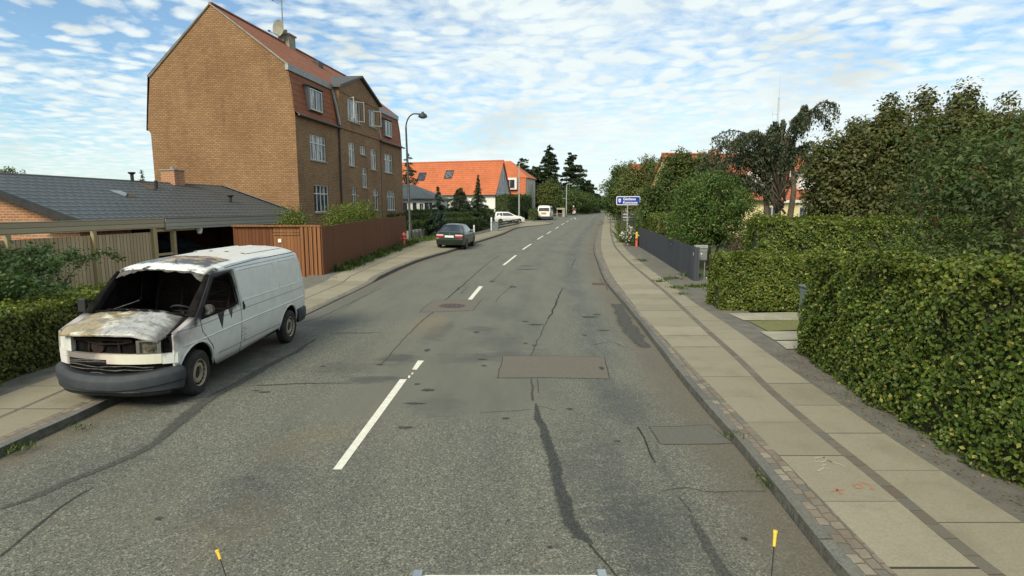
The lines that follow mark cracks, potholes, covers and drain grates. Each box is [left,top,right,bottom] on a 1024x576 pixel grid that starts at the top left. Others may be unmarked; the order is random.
crack [636,427,656,462]
crack [531,290,562,355]
